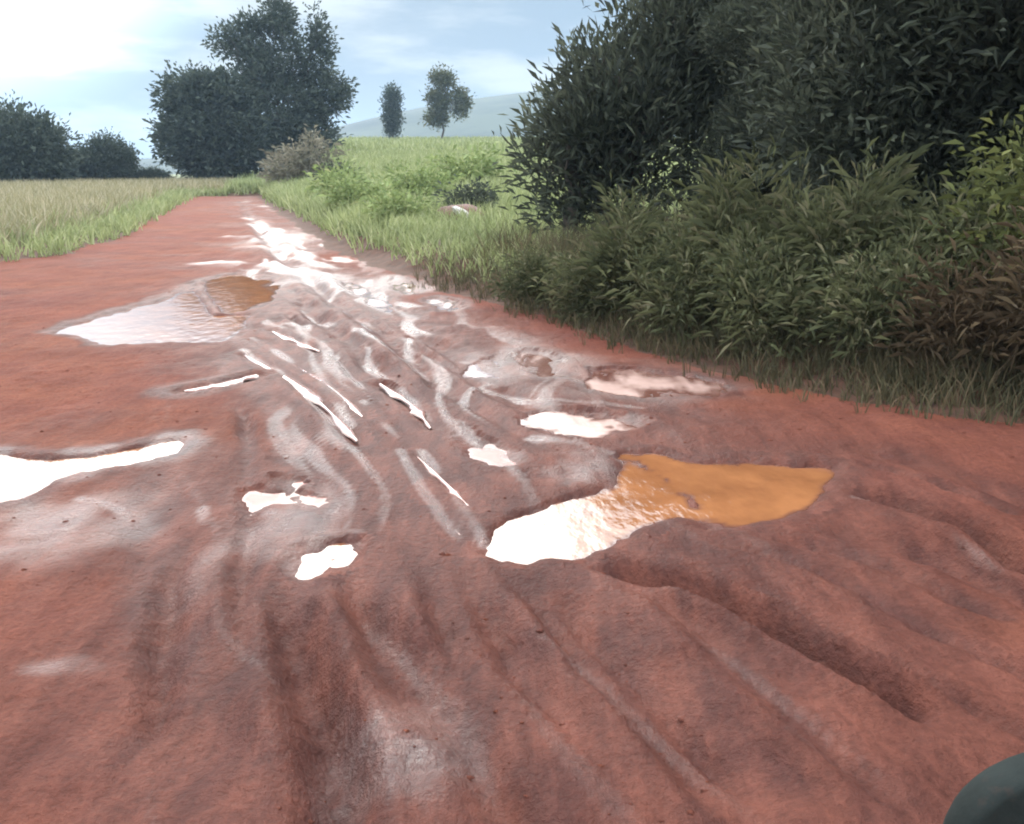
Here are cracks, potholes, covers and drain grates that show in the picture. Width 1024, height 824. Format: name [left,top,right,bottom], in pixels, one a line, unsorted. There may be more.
pothole [31,271,298,348]
pothole [566,360,755,403]
pothole [222,470,334,518]
pothole [472,444,865,570]
pothole [0,433,201,505]
pothole [505,403,657,439]
pothole [268,531,378,585]
